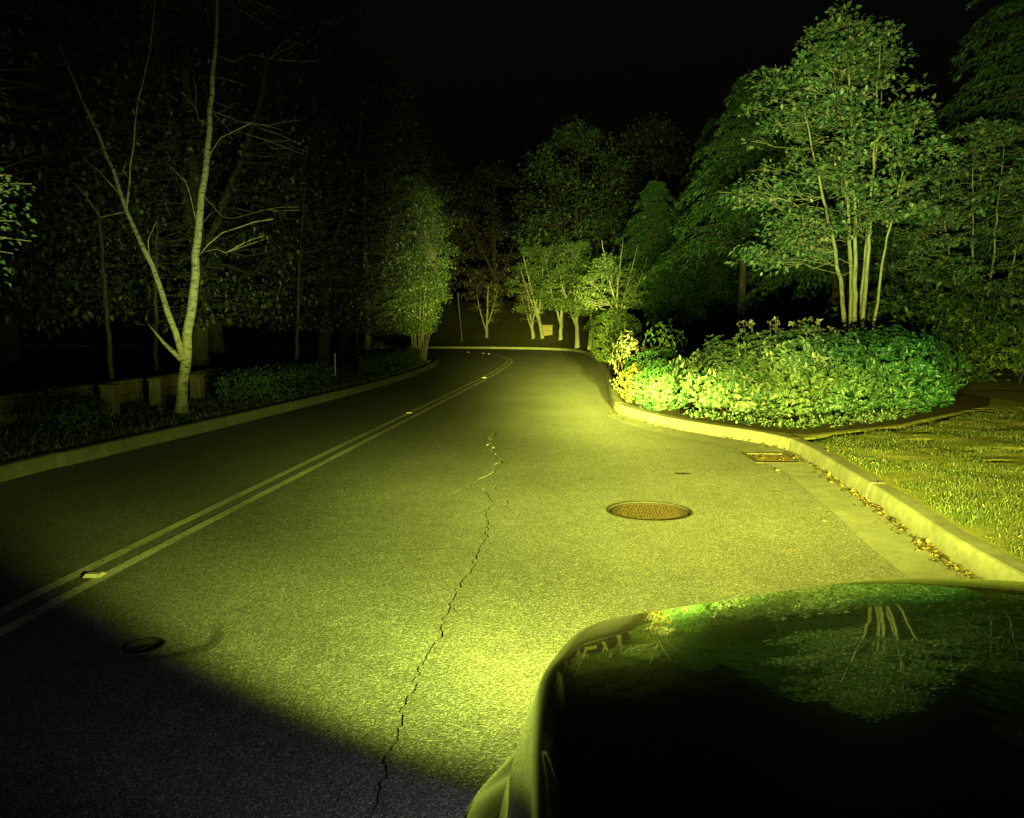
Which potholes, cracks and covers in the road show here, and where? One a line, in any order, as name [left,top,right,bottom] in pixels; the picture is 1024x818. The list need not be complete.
crack [338,431,520,817]
manhole cover [122,637,166,653]
manhole cover [606,501,693,521]
drain grate [742,453,803,463]
